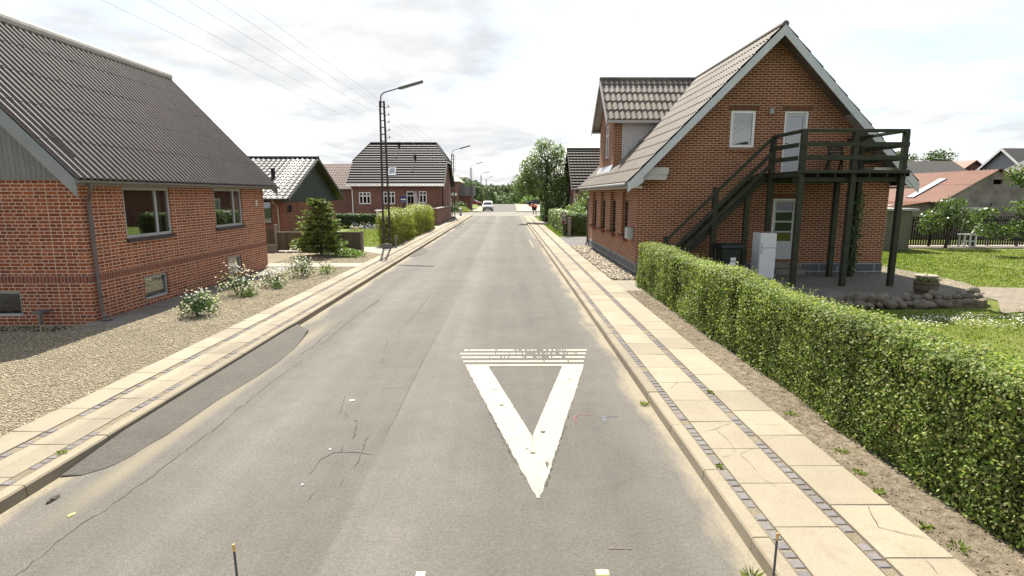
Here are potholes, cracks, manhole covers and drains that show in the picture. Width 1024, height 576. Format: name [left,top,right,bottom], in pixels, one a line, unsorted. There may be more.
crack [15,299,379,576]
